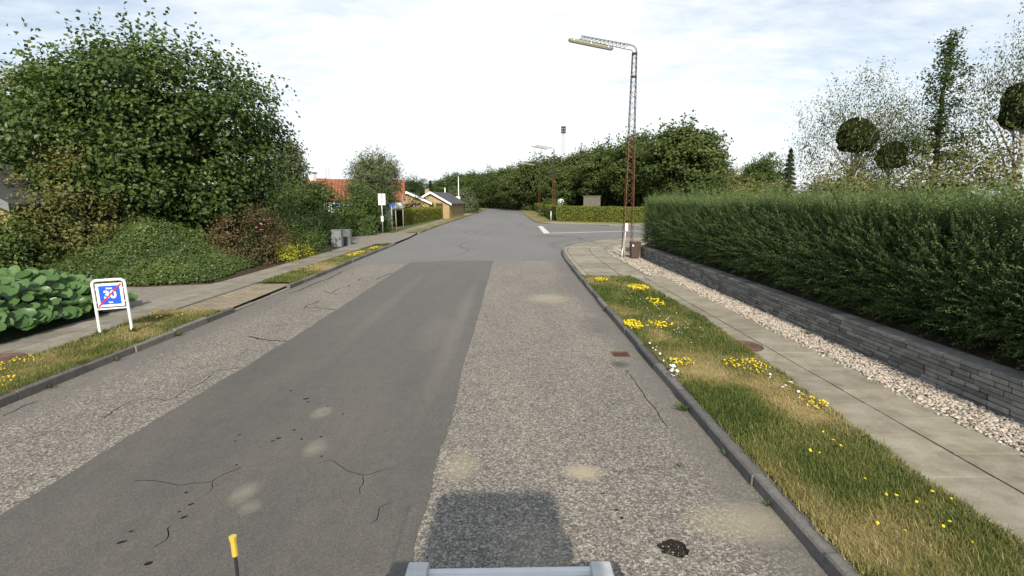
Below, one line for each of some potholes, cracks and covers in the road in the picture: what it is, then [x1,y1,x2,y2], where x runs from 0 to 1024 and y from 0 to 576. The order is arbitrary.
crack [135,467,240,492]
pothole [657,539,690,558]
manhole cover [729,340,764,352]
crack [104,367,242,418]
crack [249,272,390,342]
crack [322,460,391,523]
